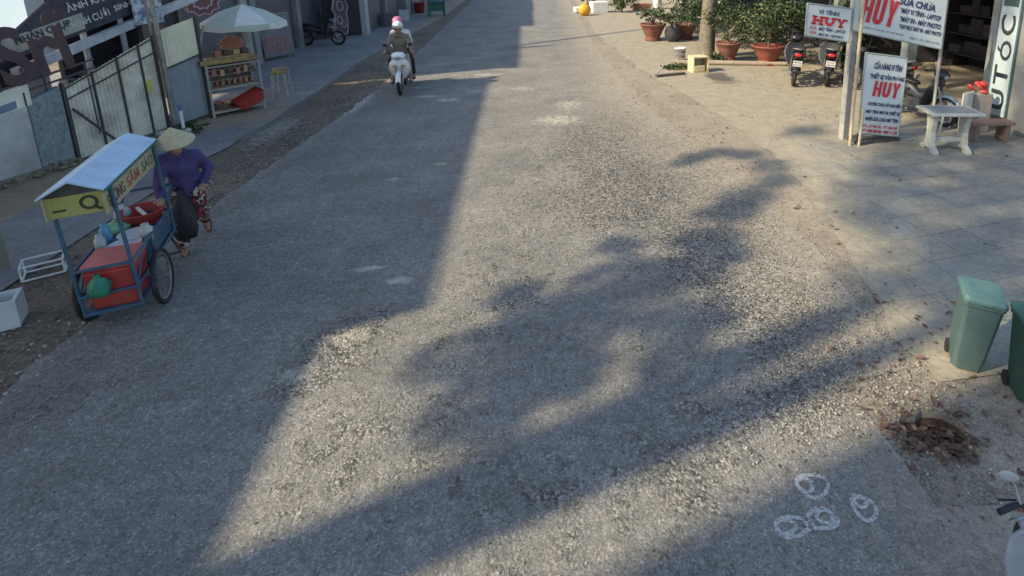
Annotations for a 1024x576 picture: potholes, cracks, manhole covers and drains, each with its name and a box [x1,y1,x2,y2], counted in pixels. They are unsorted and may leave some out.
pothole [889,403,978,456]
